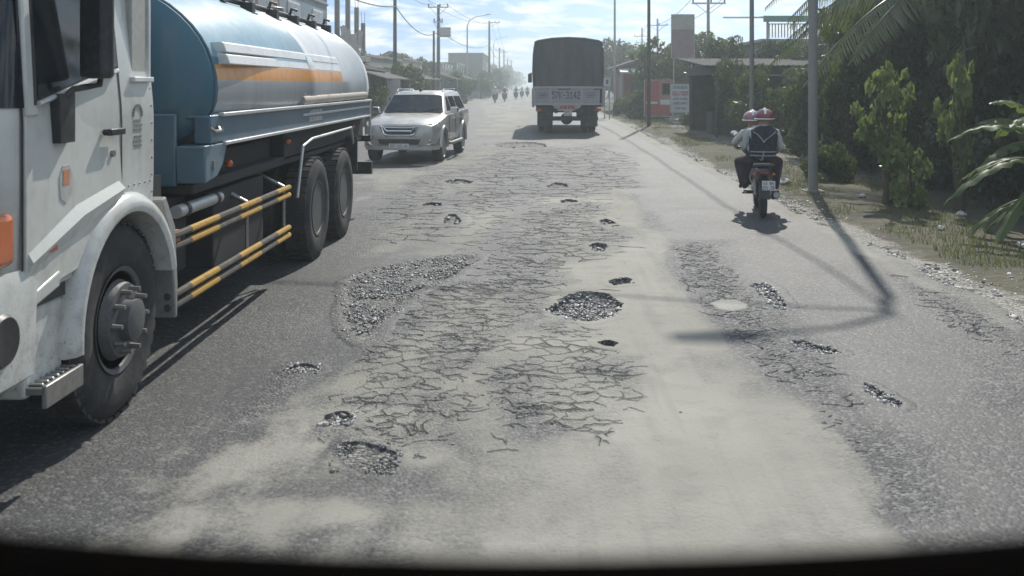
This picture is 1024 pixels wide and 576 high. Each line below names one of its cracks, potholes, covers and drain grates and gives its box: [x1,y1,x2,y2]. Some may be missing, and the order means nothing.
pothole [589,217,631,229]
pothole [307,407,368,432]
pothole [851,379,917,413]
pothole [777,338,855,359]
crack [317,148,648,459]
pothole [578,241,620,254]
pothole [597,275,644,288]
pothole [319,436,414,482]
pothole [329,252,490,349]
pothole [740,280,800,313]
crack [891,275,1024,356]
pothole [433,177,484,186]
